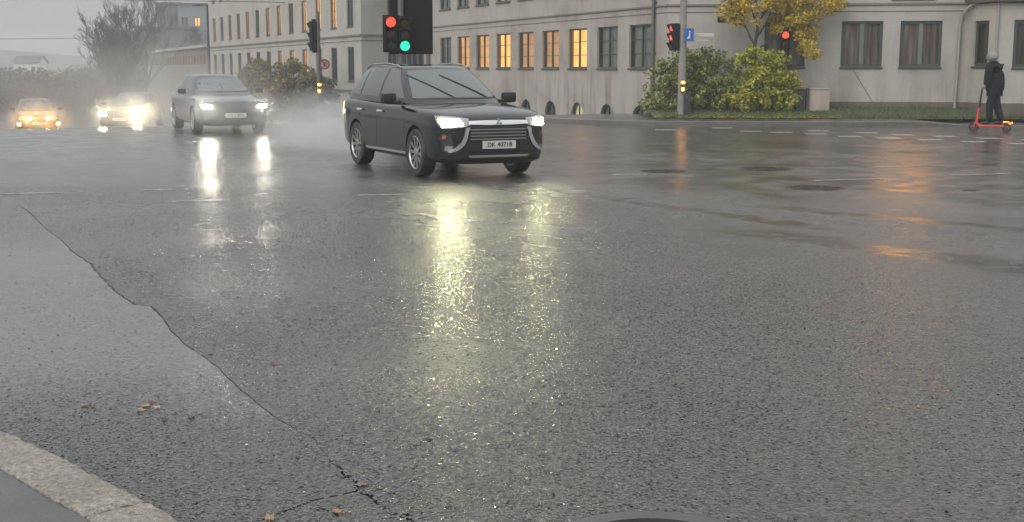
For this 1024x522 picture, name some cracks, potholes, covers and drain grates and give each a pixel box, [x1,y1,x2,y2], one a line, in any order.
crack [252,464,415,522]
manhole cover [573,511,726,522]
